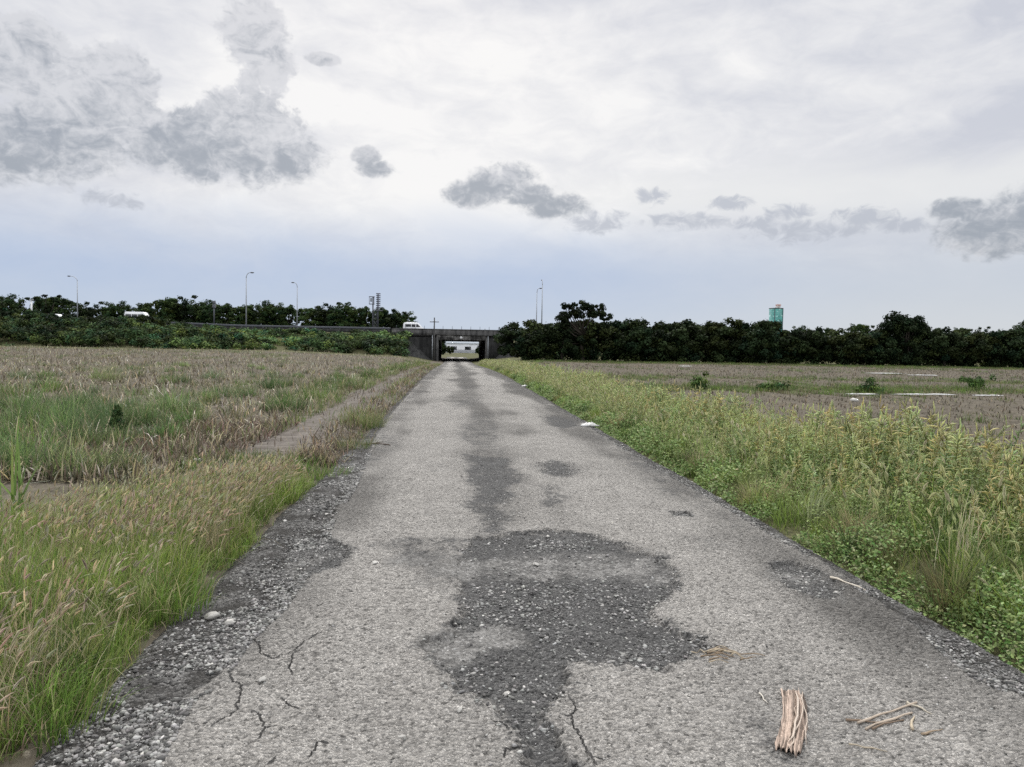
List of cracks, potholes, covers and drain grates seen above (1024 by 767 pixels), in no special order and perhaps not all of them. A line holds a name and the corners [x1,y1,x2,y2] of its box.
crack [307,740,330,758]
crack [253,631,322,675]
crack [210,671,300,765]
crack [564,694,611,766]
